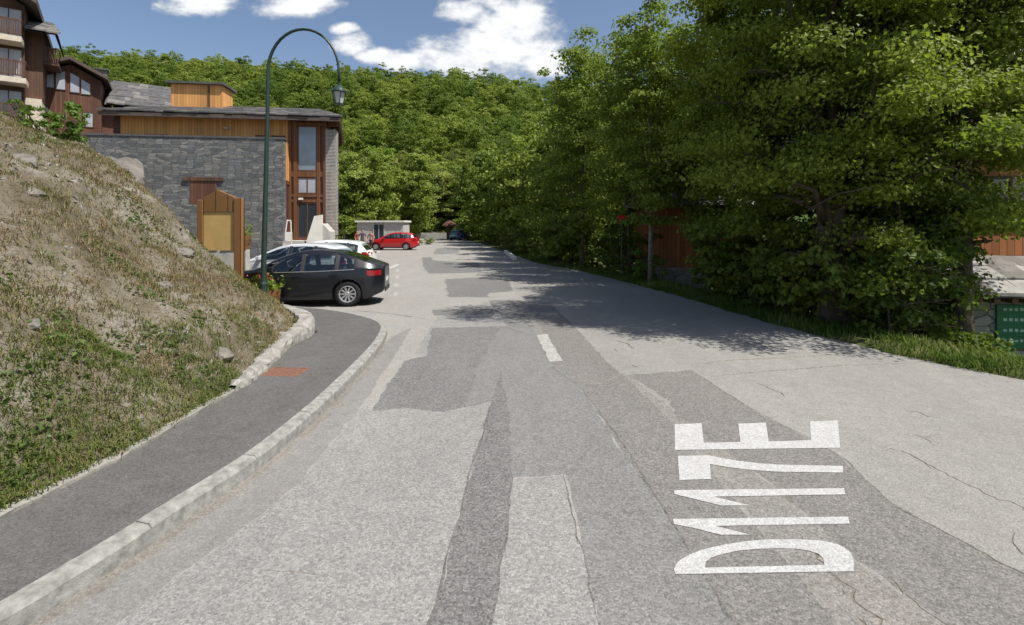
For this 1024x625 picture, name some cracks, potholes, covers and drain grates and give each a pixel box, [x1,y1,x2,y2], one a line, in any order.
crack [882,410,1024,510]
crack [691,355,916,397]
